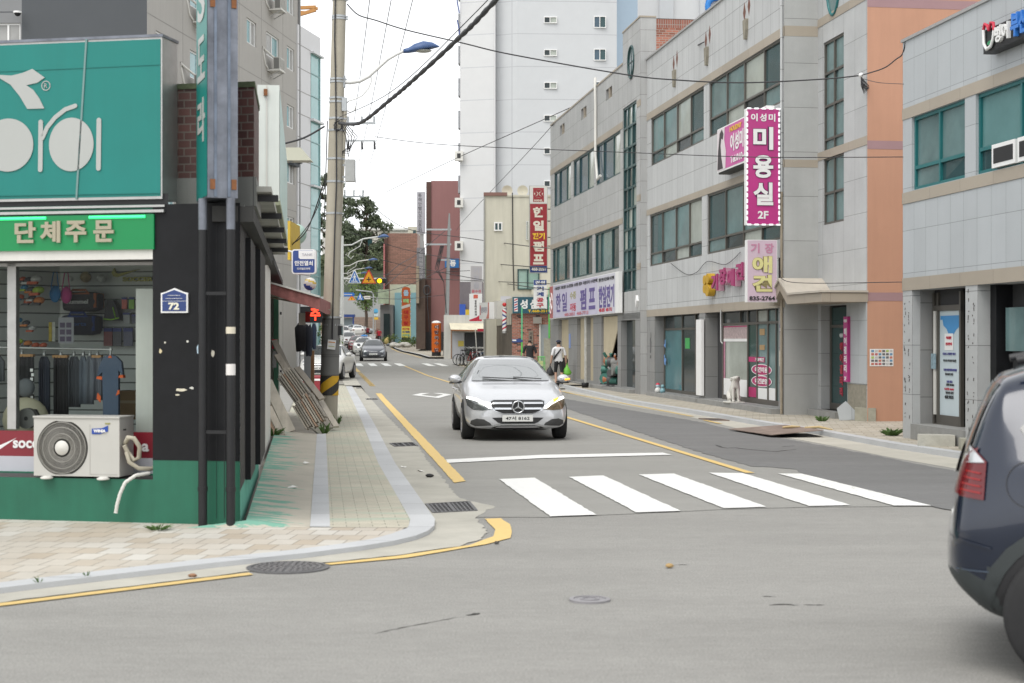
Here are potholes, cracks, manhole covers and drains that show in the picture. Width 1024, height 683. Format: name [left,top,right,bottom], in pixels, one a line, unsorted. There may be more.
manhole cover [569,595,610,604]
manhole cover [246,561,330,574]
drain grate [425,501,478,513]
crack [376,613,480,634]
